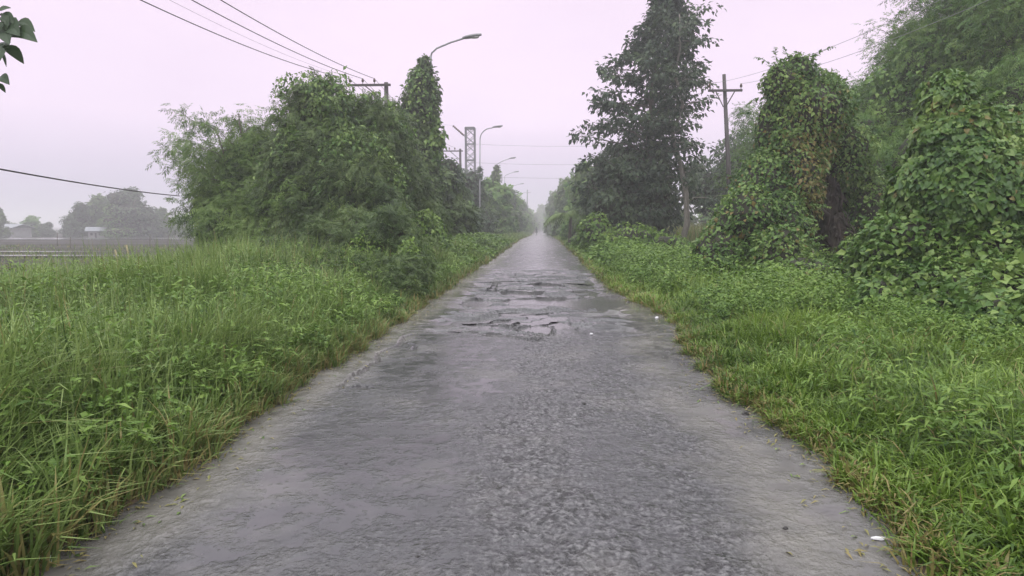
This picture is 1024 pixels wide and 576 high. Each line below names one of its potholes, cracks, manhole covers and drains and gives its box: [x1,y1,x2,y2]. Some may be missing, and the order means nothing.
crack [337,334,418,386]
